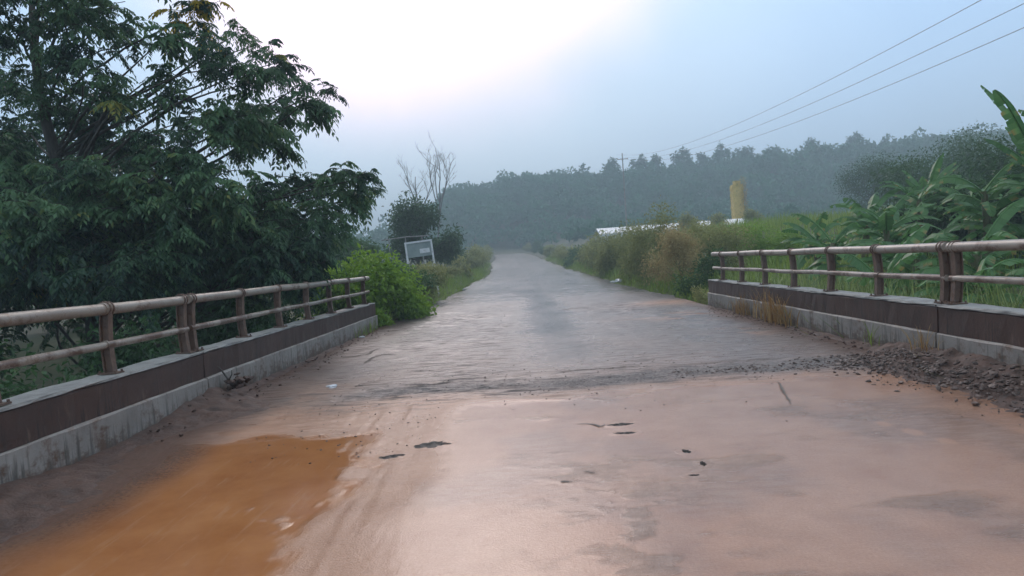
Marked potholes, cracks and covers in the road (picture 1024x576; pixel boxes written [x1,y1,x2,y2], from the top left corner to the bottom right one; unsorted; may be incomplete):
pothole [371,453,412,461]
pothole [409,440,457,450]
